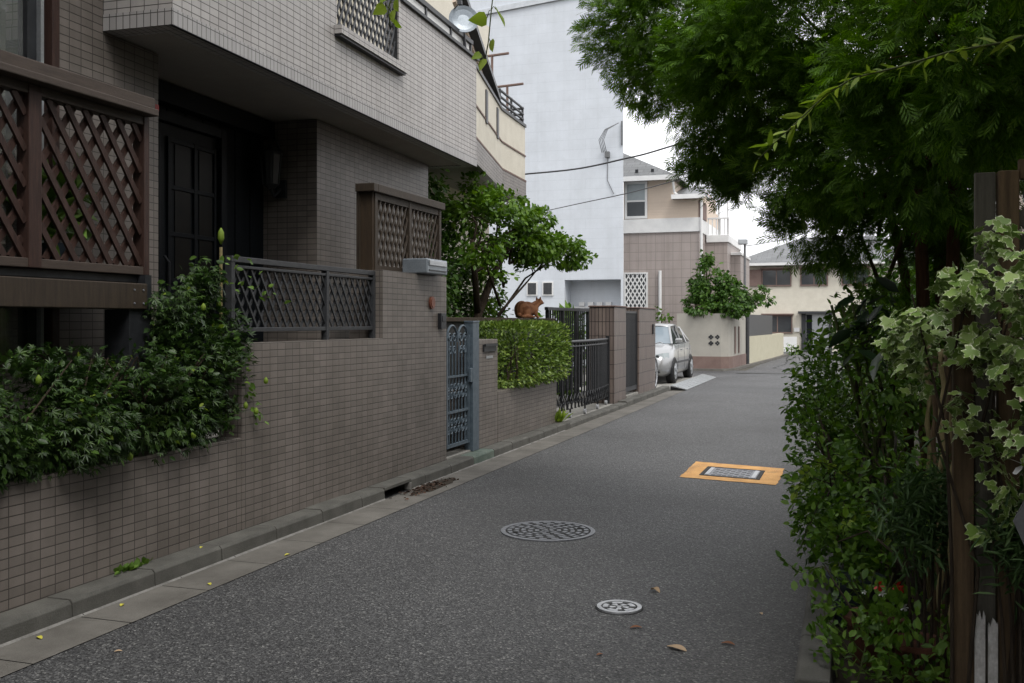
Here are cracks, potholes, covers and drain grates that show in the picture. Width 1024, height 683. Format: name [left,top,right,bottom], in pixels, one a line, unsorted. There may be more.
manhole cover [501,521,595,542]
drain grate [368,477,412,499]
manhole cover [595,600,643,615]
